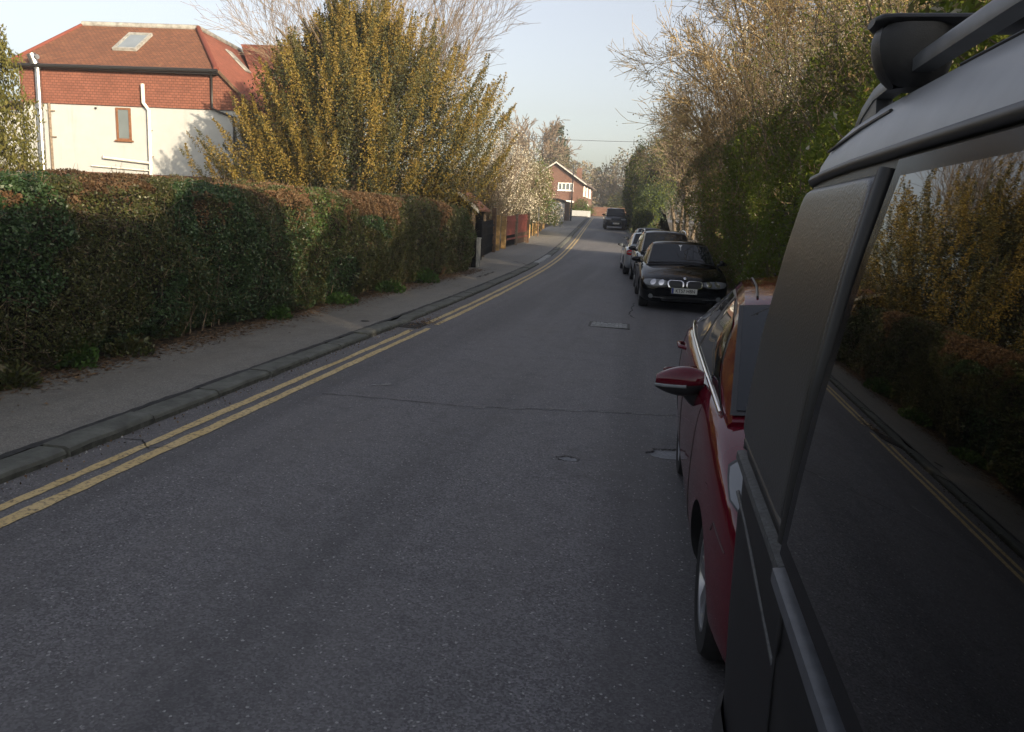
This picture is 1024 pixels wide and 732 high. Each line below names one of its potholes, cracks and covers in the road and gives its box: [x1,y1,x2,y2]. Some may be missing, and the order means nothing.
manhole cover [588,321,630,330]
crack [322,393,663,415]
